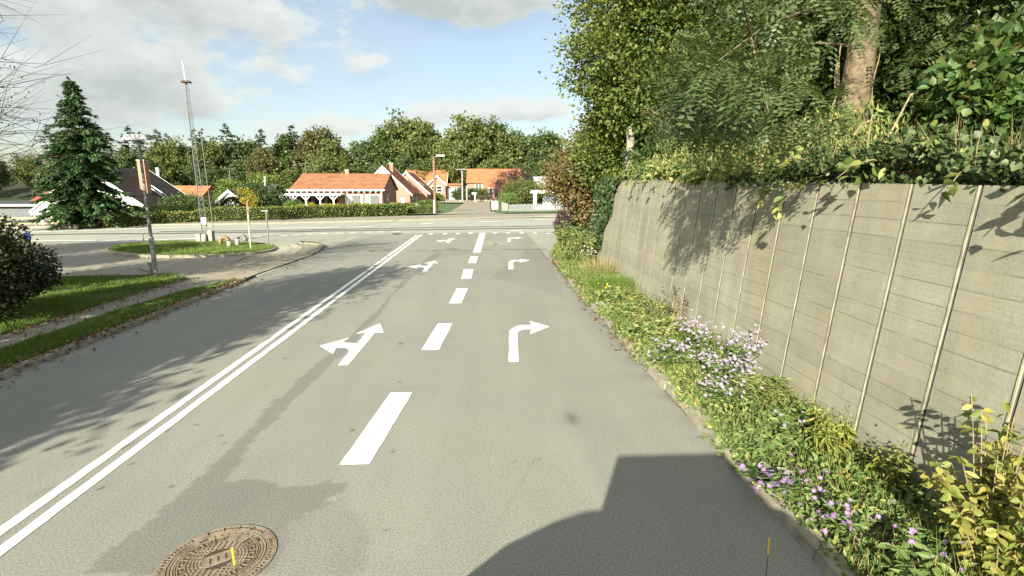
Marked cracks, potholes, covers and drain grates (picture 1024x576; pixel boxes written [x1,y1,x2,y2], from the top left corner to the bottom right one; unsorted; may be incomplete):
manhole cover [154,525,277,576]
